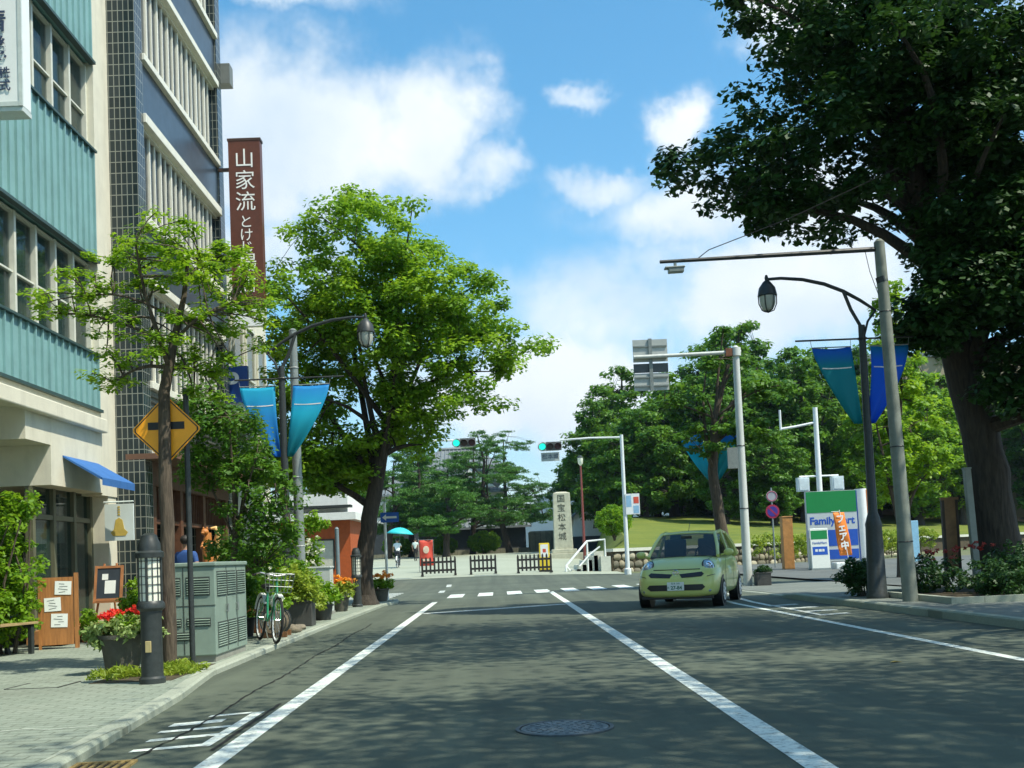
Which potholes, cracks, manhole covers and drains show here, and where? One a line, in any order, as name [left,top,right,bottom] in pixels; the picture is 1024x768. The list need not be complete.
drain grate [69,759,138,768]
manhole cover [515,719,614,737]
